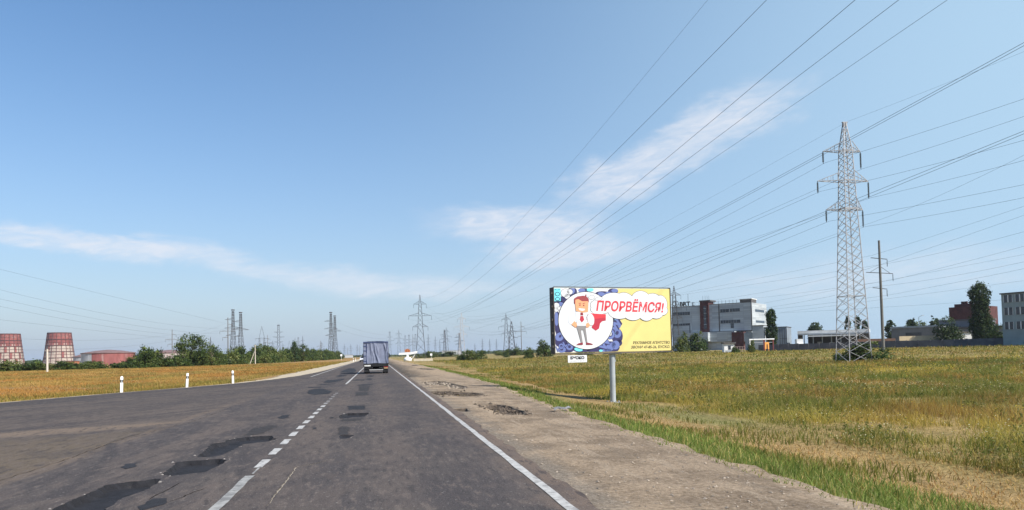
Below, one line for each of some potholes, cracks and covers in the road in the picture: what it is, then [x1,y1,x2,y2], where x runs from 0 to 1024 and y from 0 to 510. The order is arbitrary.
pothole [473,402,532,415]
crack [267,456,341,506]
pothole [421,381,475,389]
